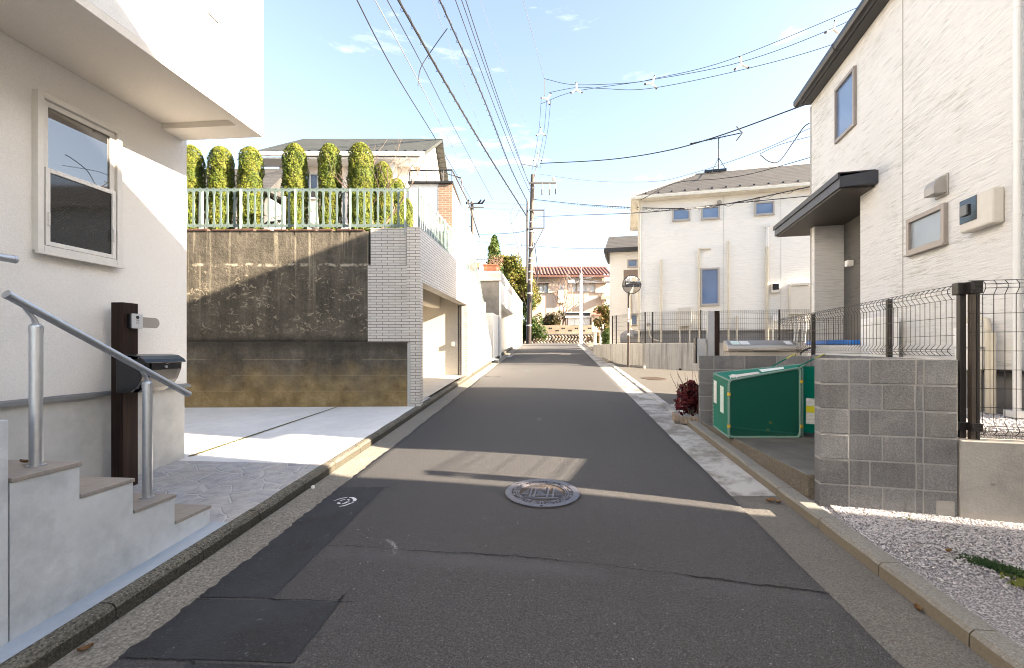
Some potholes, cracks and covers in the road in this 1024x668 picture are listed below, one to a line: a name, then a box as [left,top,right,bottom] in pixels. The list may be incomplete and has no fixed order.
crack [328,545,830,594]
manhole cover [504,479,581,508]
